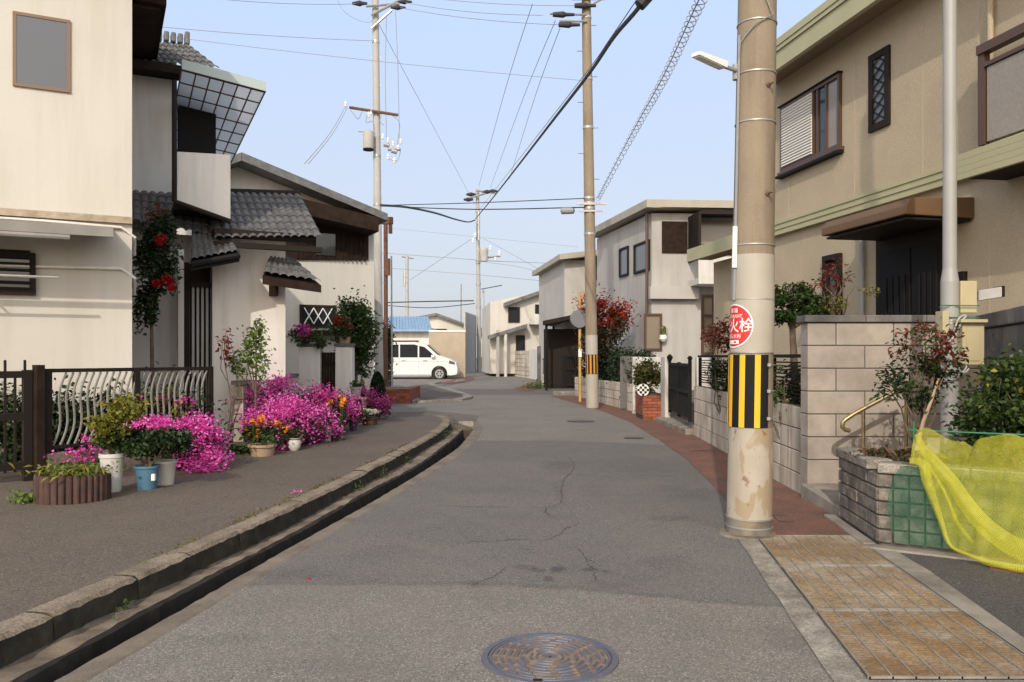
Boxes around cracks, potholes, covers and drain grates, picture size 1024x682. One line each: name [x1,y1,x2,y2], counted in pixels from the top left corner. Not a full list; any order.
crack [440,457,608,586]
manhole cover [481,633,619,682]
